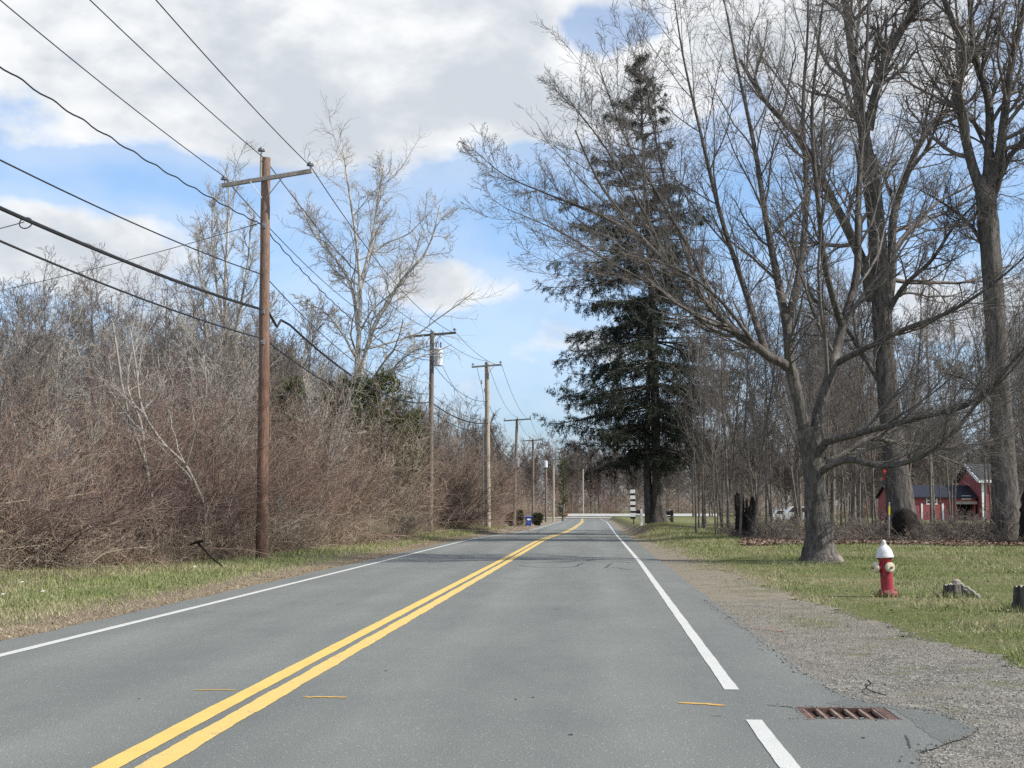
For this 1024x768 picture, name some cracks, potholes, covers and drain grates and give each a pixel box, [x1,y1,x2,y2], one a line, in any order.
drain grate [795,707,900,720]
